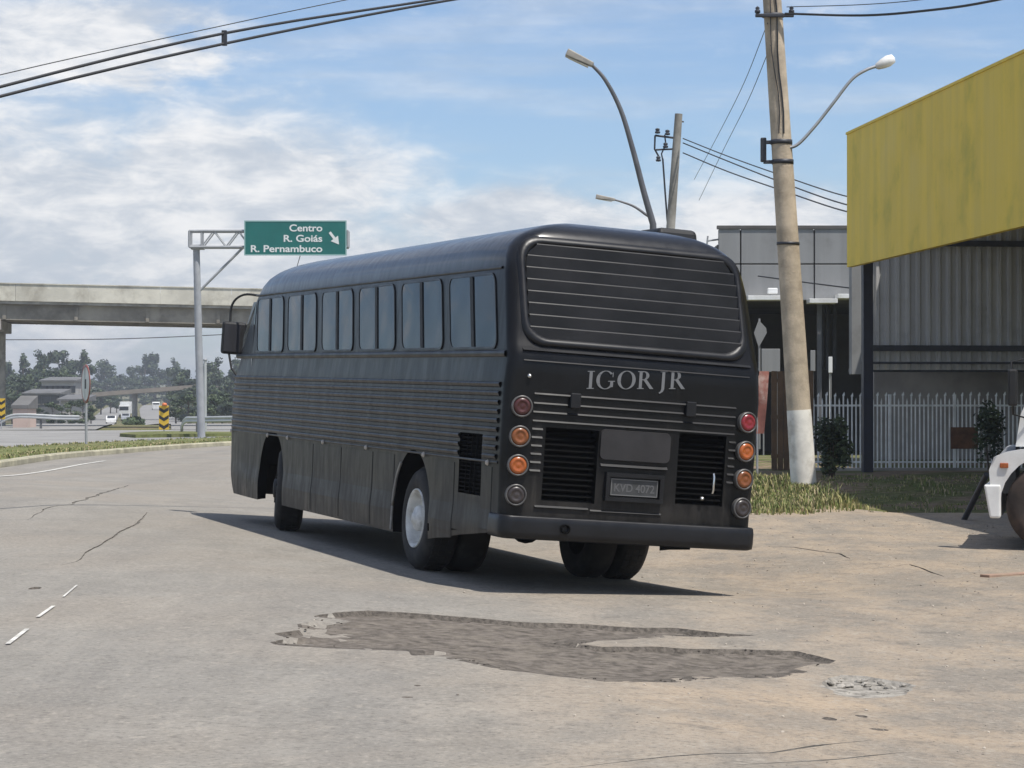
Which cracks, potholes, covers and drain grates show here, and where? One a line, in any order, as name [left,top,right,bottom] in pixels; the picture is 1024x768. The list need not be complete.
pothole [820,675,916,698]
crack [28,485,147,565]
pothole [270,610,835,682]
crack [572,740,903,768]
